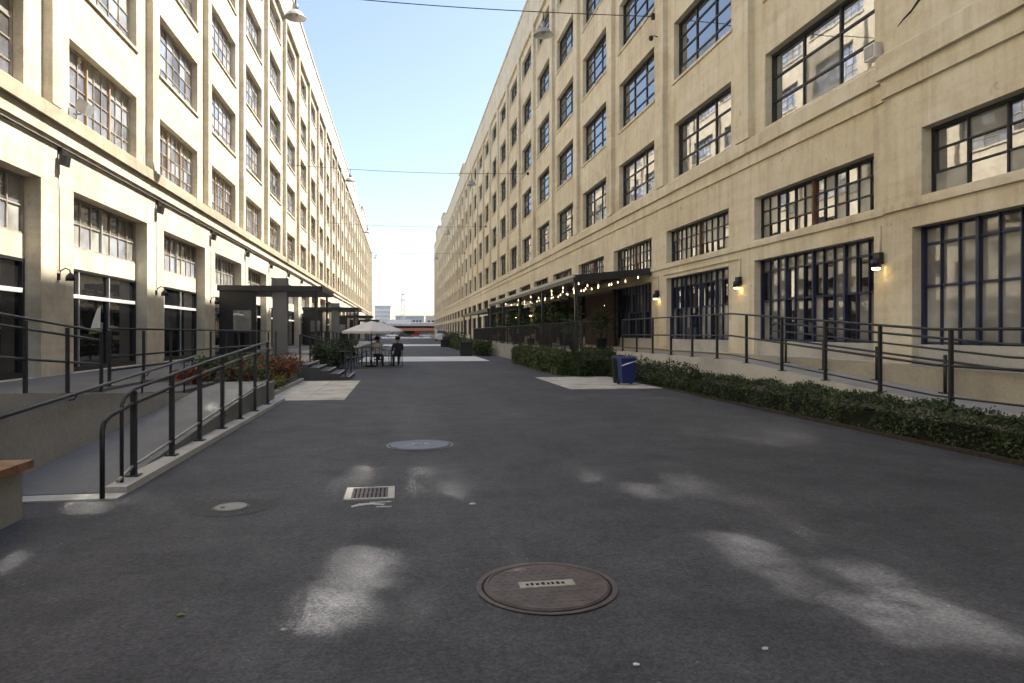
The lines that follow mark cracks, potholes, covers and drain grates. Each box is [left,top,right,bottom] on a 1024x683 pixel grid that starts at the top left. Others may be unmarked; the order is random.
manhole cover [386,439,453,450]
manhole cover [476,562,618,614]
manhole cover [189,499,273,517]
drain grate [343,486,395,501]
